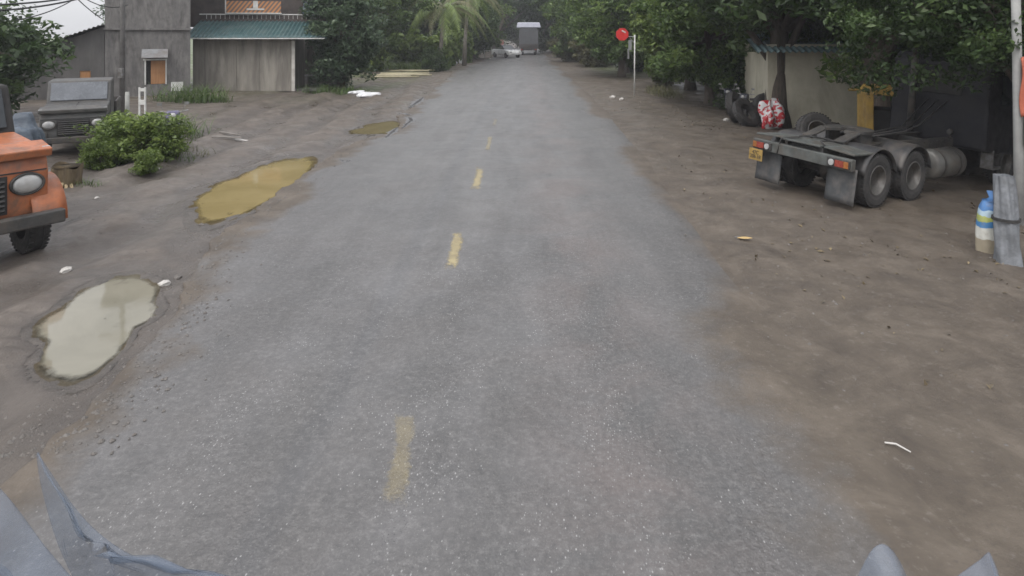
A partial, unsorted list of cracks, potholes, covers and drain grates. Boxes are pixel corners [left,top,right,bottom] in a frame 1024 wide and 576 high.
pothole [19,270,170,397]
pothole [343,120,400,136]
pothole [180,153,325,232]
